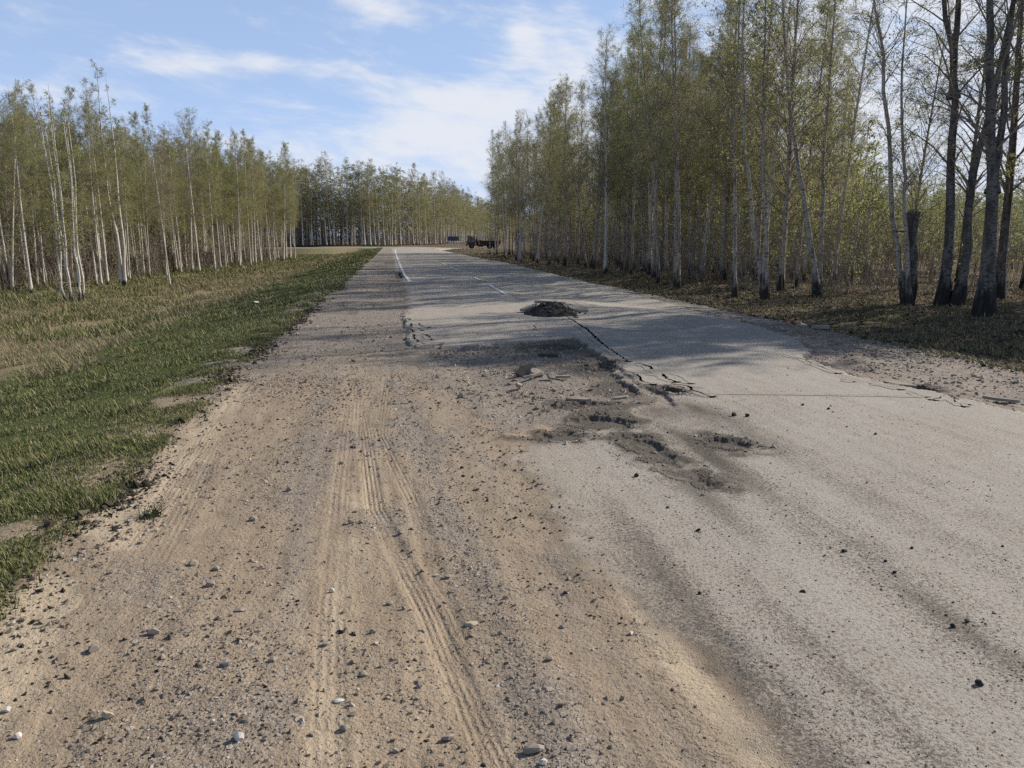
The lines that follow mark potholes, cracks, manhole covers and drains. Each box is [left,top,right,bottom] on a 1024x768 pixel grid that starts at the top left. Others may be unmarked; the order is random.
pothole [655,385,691,396]
pothole [608,432,729,492]
